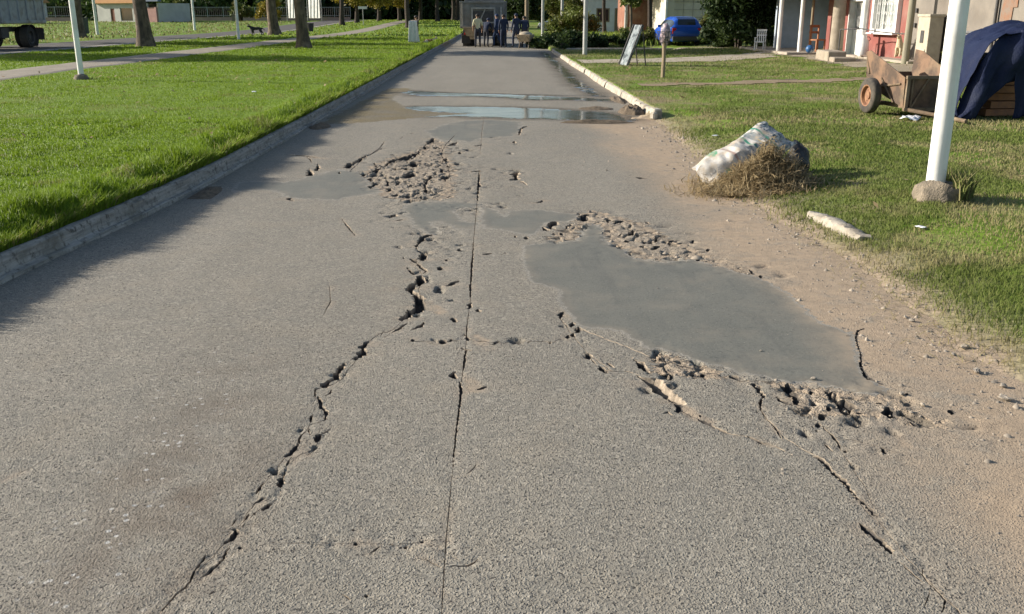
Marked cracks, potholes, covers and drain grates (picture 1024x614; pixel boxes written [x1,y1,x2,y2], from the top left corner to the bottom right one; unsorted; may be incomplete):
crack [159,234,961,614]
crack [350,133,454,193]
